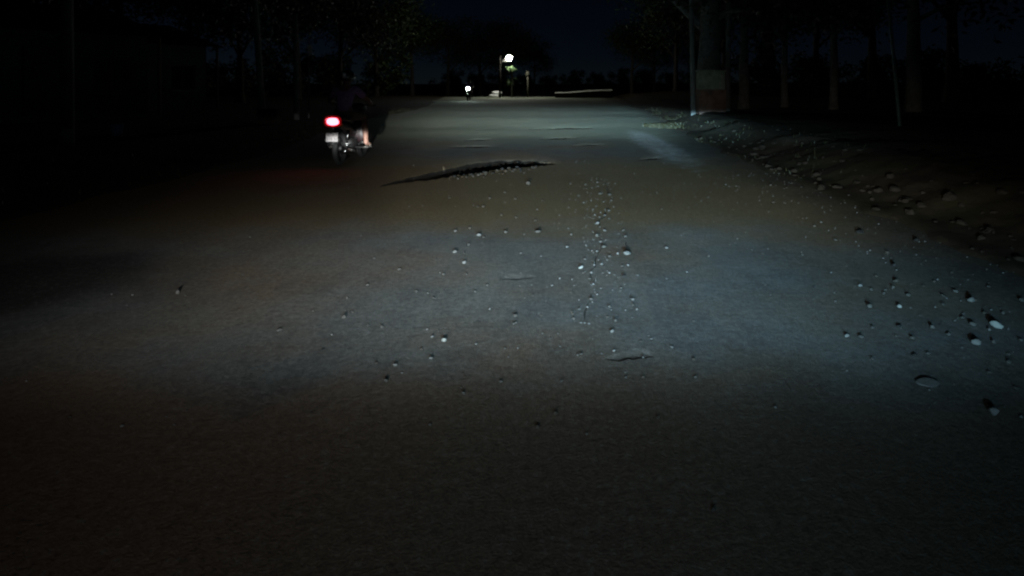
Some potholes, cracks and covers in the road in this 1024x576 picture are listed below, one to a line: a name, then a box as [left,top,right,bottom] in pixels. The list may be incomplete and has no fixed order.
pothole [378,152,561,187]
pothole [604,348,655,362]
